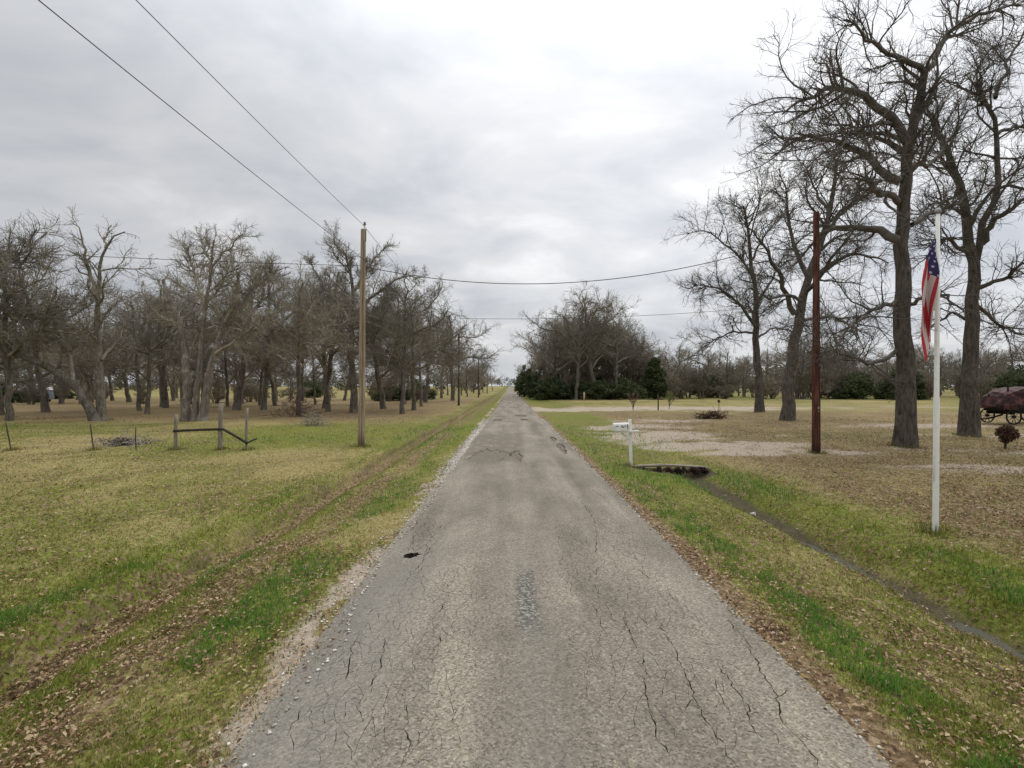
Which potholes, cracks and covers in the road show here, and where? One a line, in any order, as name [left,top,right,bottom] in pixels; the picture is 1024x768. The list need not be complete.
crack [287,516,479,767]
crack [555,490,819,768]
